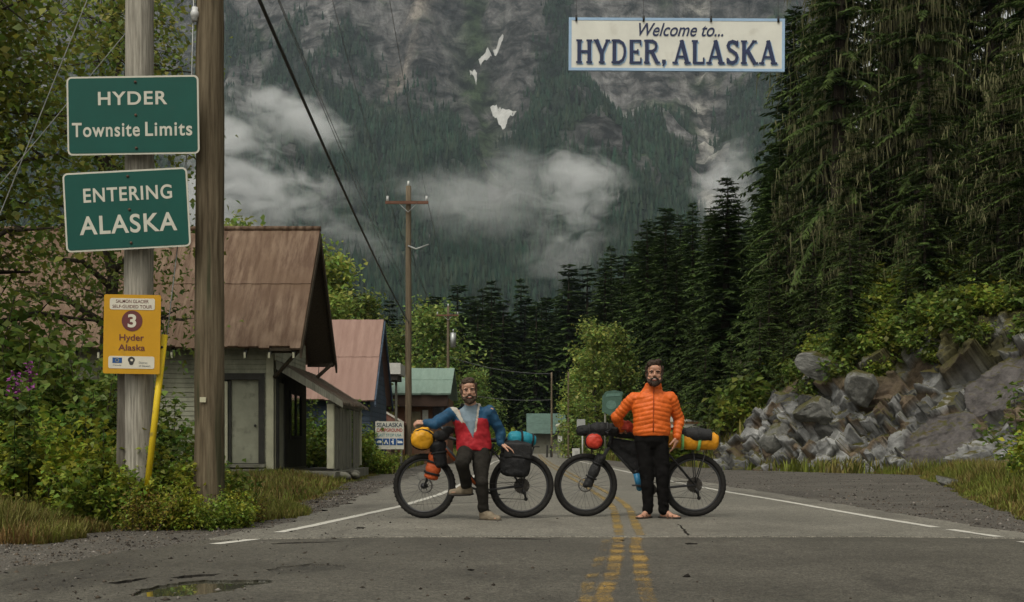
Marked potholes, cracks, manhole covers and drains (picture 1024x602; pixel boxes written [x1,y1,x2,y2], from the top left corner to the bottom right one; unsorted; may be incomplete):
pothole [129,580,272,597]
